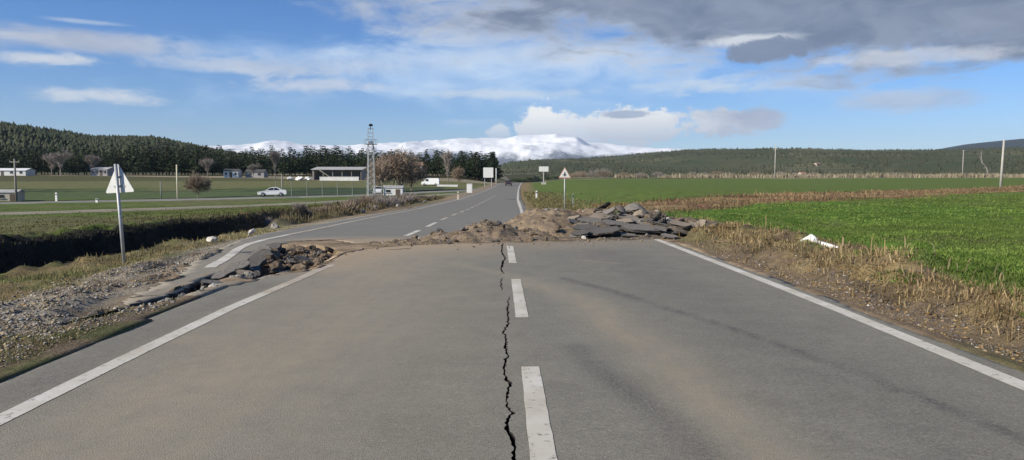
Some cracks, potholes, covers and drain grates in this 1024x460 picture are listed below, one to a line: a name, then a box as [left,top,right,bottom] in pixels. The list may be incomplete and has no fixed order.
pothole [257,246,333,279]
crack [500,244,517,460]
